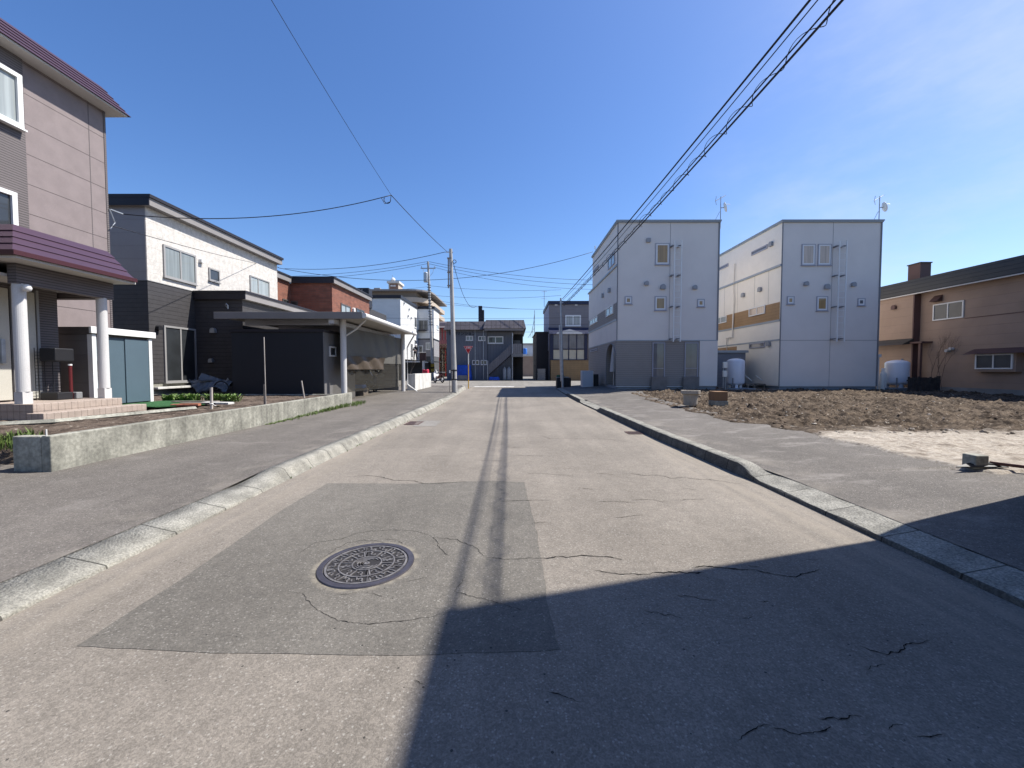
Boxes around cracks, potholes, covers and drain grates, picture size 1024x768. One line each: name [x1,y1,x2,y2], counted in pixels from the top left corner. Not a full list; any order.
manhole cover [316,543,414,589]
crack [300,530,819,577]
crack [858,640,928,669]
crack [739,715,856,740]
